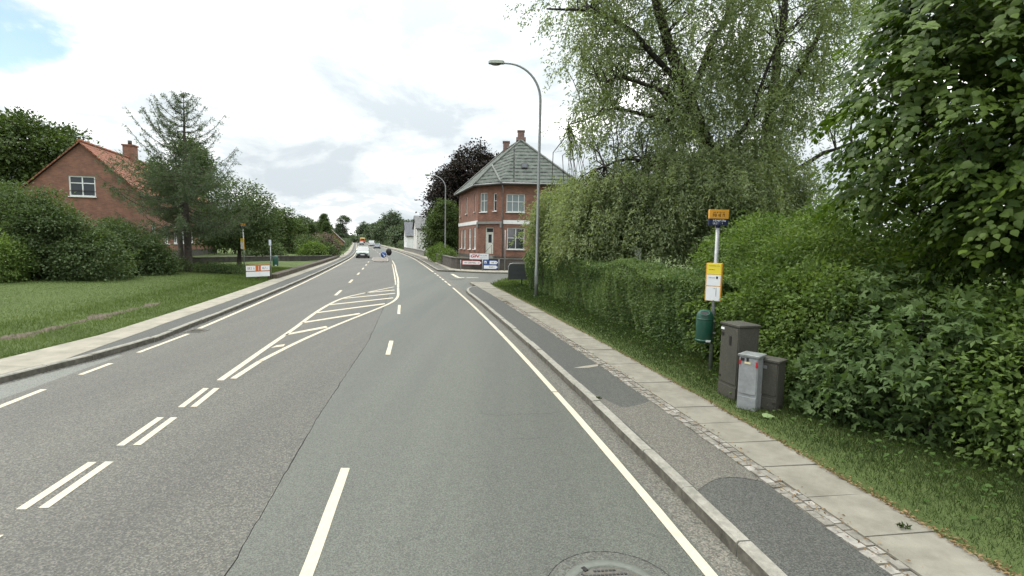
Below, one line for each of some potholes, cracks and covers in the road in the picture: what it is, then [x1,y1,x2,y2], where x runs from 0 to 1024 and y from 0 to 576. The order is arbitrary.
manhole cover [548,551,669,576]
